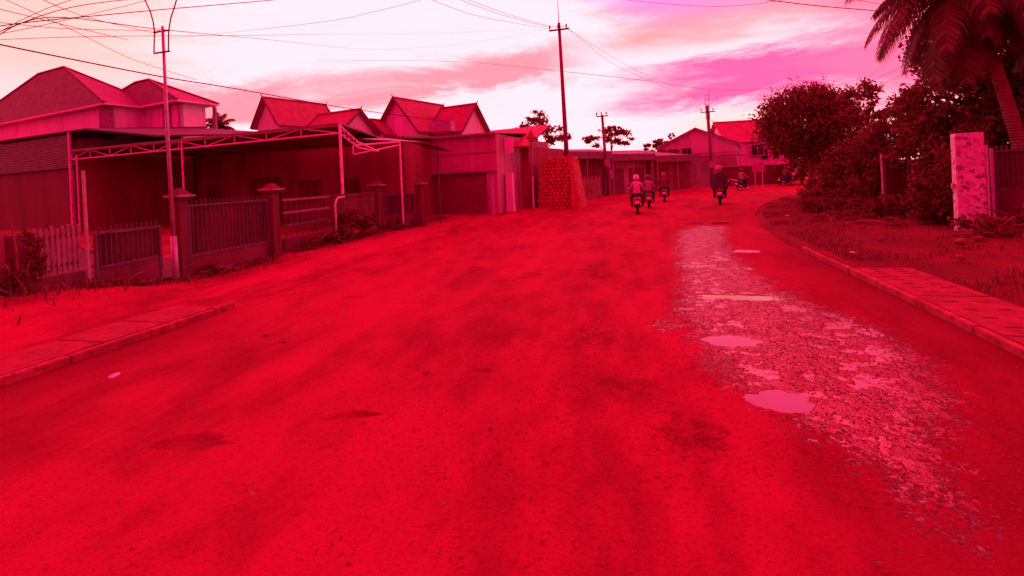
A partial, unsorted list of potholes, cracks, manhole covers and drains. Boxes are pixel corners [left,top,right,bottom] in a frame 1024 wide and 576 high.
pothole [149,431,236,454]
pothole [699,335,764,347]
pothole [319,411,381,421]
pothole [741,389,816,413]
